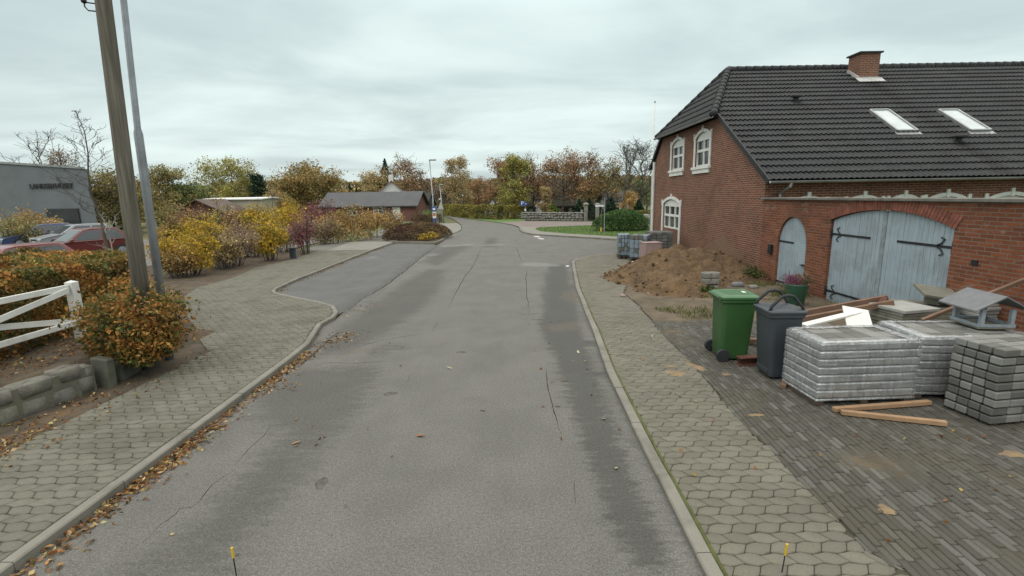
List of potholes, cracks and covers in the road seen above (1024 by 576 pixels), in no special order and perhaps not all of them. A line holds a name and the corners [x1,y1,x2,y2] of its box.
crack [146,425,271,540]
